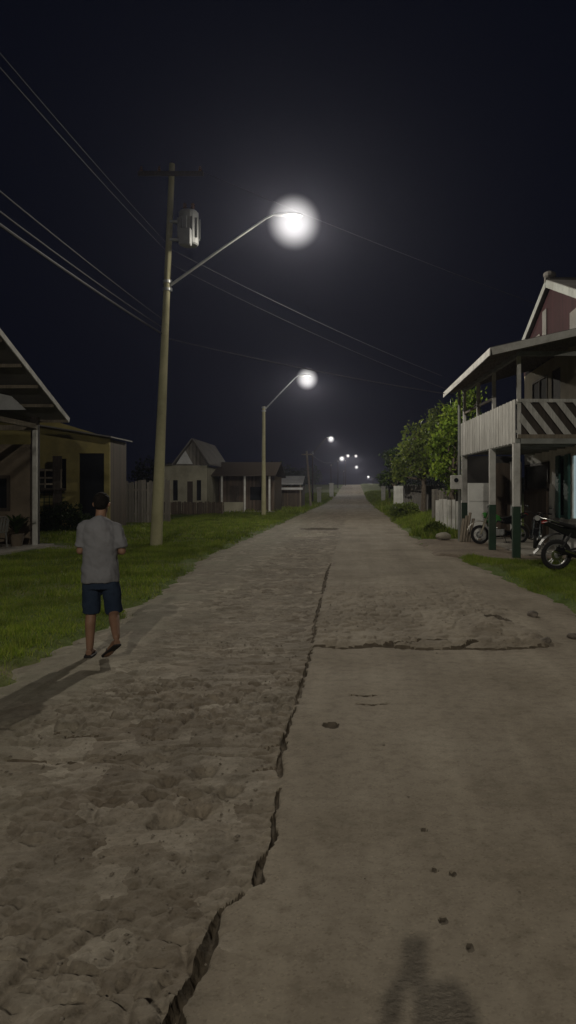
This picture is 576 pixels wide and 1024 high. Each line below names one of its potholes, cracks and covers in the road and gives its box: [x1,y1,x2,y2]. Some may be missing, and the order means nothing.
crack [160,564,549,1024]
